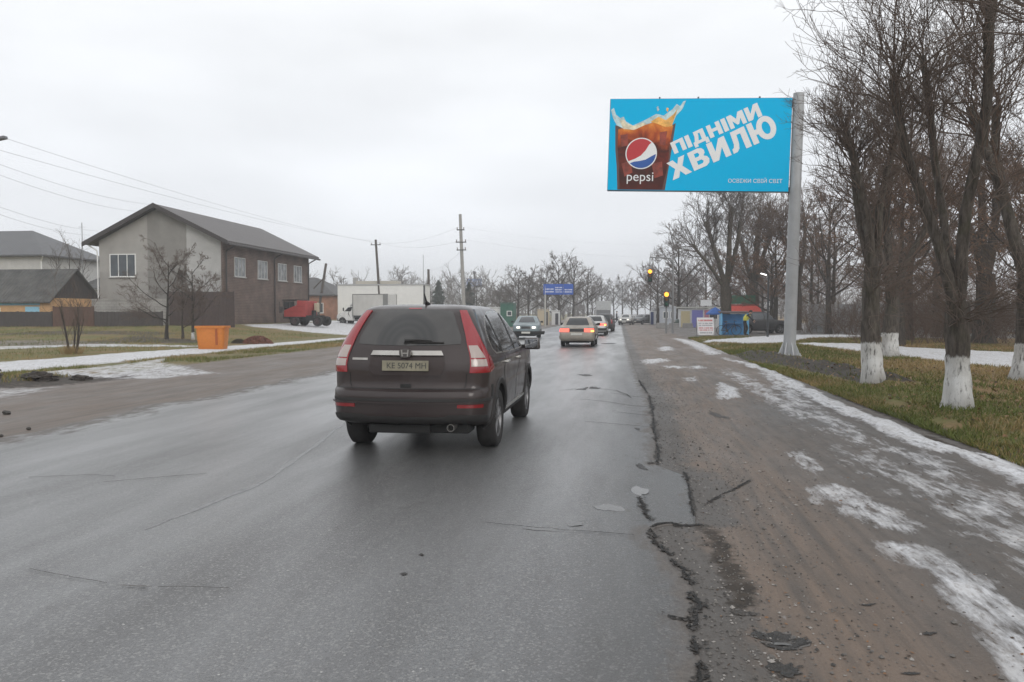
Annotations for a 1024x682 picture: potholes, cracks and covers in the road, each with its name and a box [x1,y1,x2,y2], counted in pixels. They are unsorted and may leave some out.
pothole [750,629,812,651]
crack [489,471,712,682]
crack [30,568,228,588]
crack [568,380,664,464]
